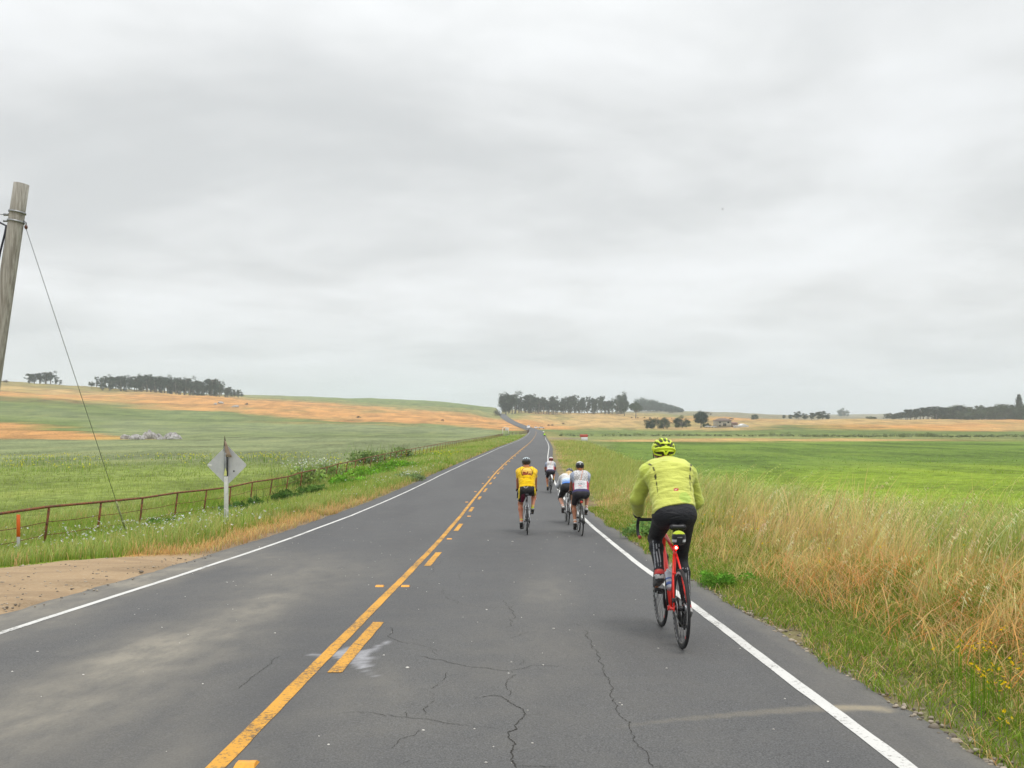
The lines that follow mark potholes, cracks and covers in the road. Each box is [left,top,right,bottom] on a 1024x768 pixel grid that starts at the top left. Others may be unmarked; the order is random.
crack [375,626,555,767]
crack [577,624,667,767]
